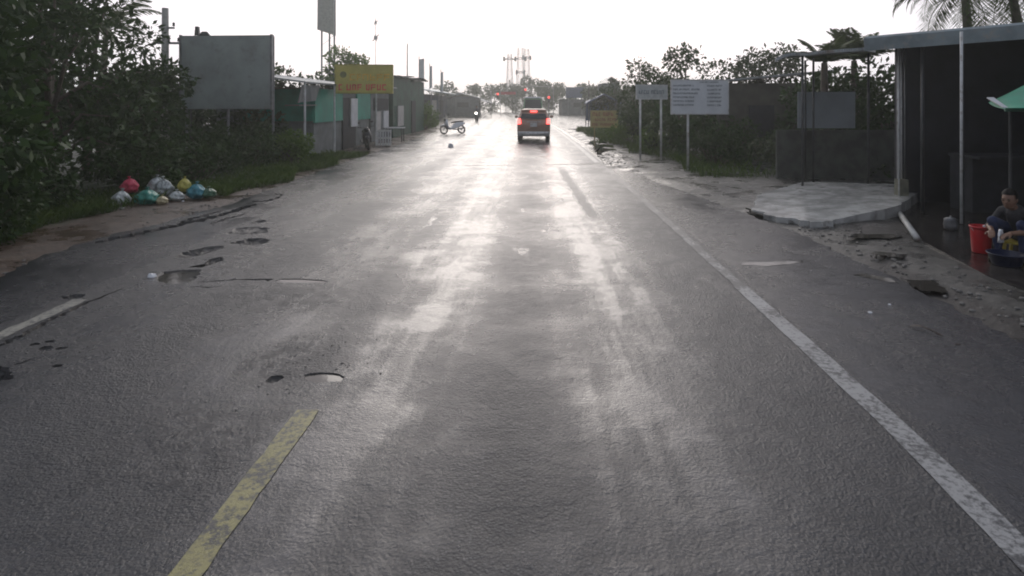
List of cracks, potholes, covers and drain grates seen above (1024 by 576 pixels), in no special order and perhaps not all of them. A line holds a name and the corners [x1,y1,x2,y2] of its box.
pothole [188,257,223,268]
pothole [0,366,14,381]
pothole [174,246,224,259]
pothole [225,226,271,235]
pothole [156,269,201,284]
crack [95,194,282,243]
pothole [304,372,344,382]
